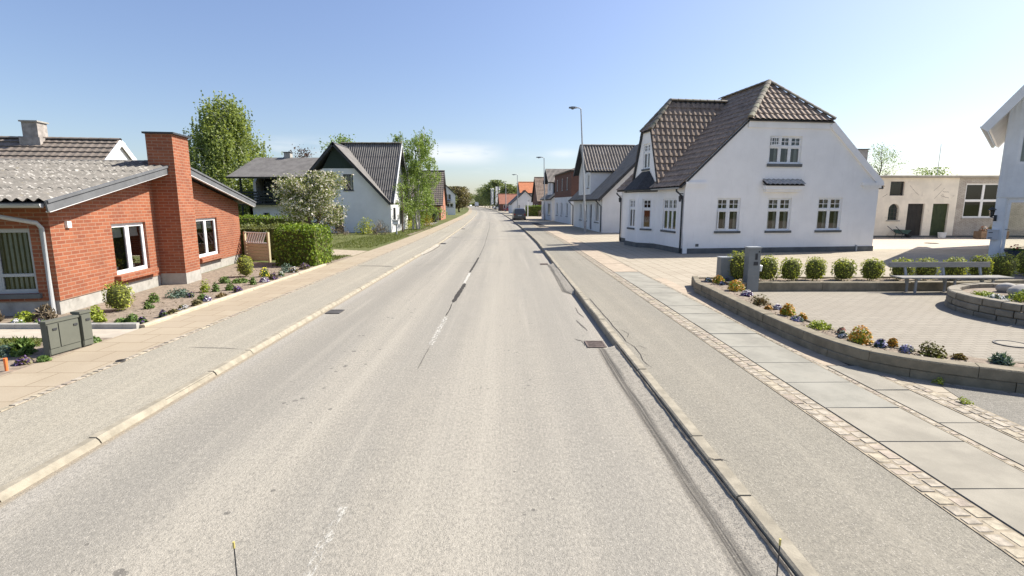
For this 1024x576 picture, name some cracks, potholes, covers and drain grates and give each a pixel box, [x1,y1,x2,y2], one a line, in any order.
manhole cover [992,340,1024,348]
crack [574,298,653,368]
